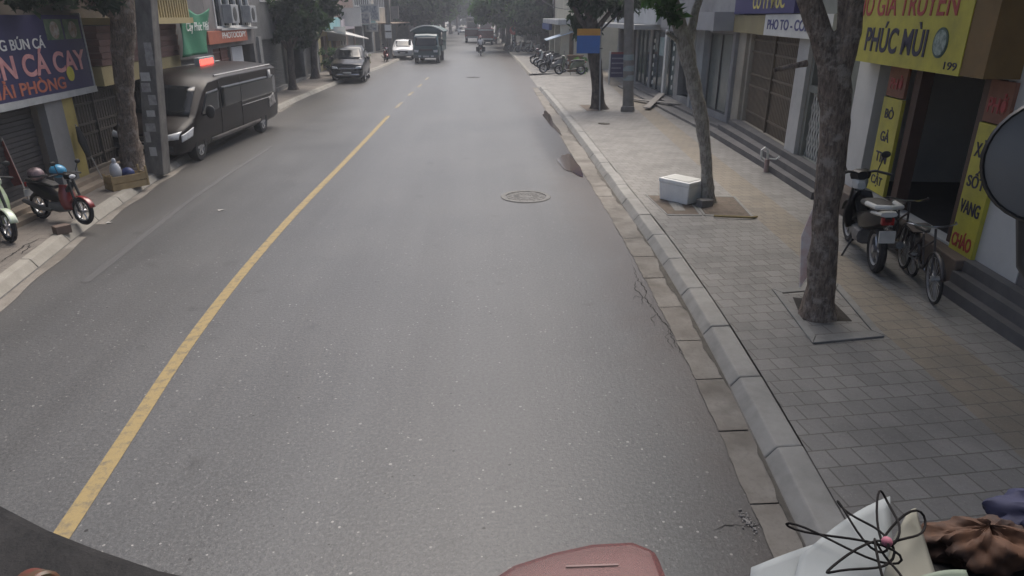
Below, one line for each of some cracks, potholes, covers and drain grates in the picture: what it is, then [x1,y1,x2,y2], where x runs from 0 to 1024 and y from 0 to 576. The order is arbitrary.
crack [633,267,685,358]
manhole cover [501,190,551,203]
